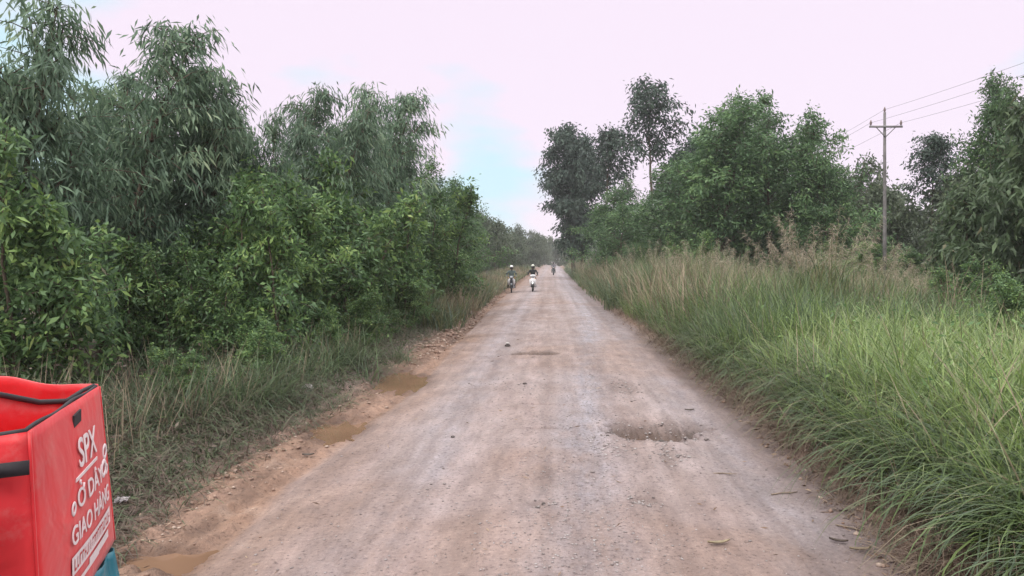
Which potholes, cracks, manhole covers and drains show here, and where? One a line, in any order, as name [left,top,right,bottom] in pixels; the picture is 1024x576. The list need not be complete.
pothole [593,414,723,445]
pothole [298,416,372,446]
pothole [365,366,436,396]
pothole [115,541,219,576]
